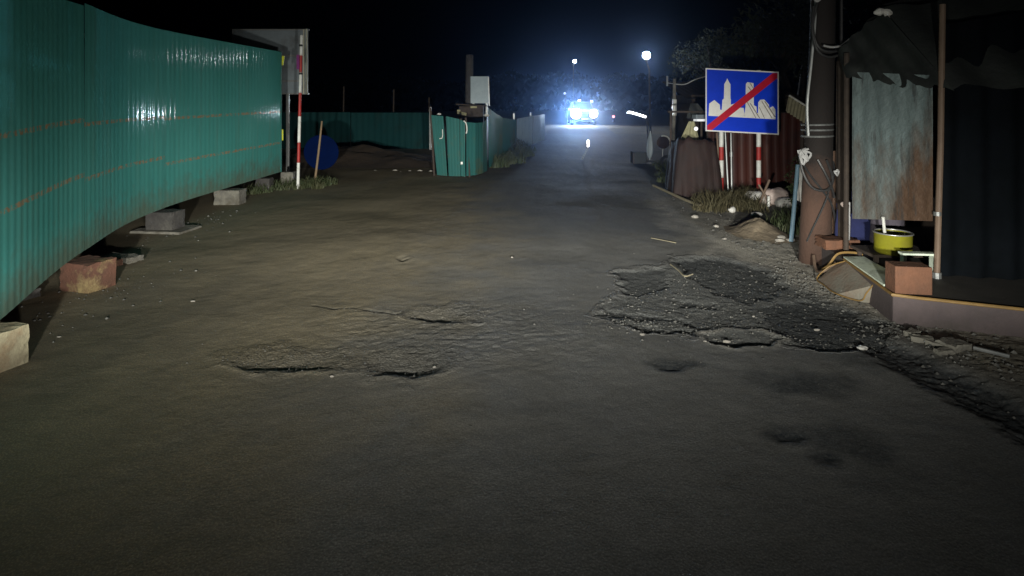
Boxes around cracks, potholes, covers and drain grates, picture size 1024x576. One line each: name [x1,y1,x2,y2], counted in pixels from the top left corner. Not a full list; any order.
pothole [361,344,466,381]
pothole [584,254,906,356]
pothole [756,422,821,446]
pothole [803,446,852,470]
pothole [645,357,699,374]
crack [311,304,403,315]
